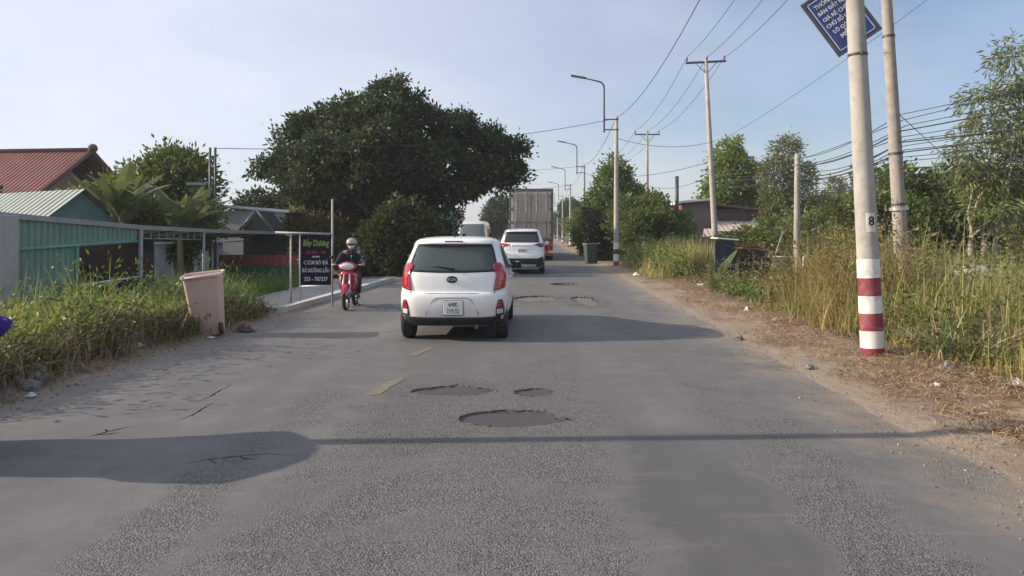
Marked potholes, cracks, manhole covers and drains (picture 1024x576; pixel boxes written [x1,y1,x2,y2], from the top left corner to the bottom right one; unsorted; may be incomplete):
pothole [458,409,573,427]
crack [178,384,233,421]
pothole [410,383,498,396]
pothole [513,388,556,397]
pothole [570,296,600,306]
crack [184,454,281,465]
